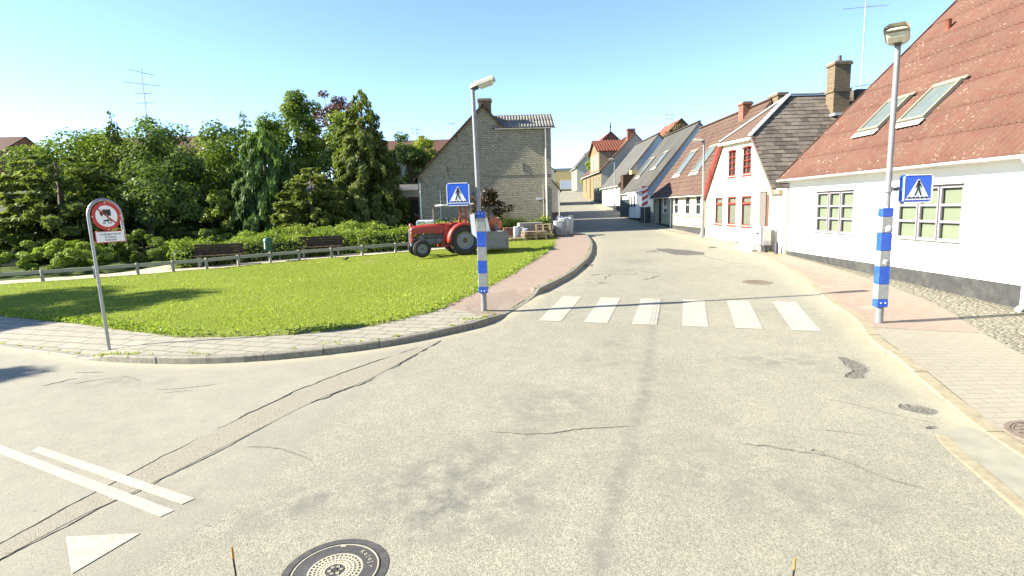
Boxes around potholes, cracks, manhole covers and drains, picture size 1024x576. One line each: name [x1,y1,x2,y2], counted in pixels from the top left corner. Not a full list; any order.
pothole [838,357,871,379]
manhole cover [281,539,389,576]
crack [489,426,630,435]
manhole cover [1004,420,1024,443]
crack [0,341,441,561]
pothole [898,404,939,415]
crack [746,430,929,490]
